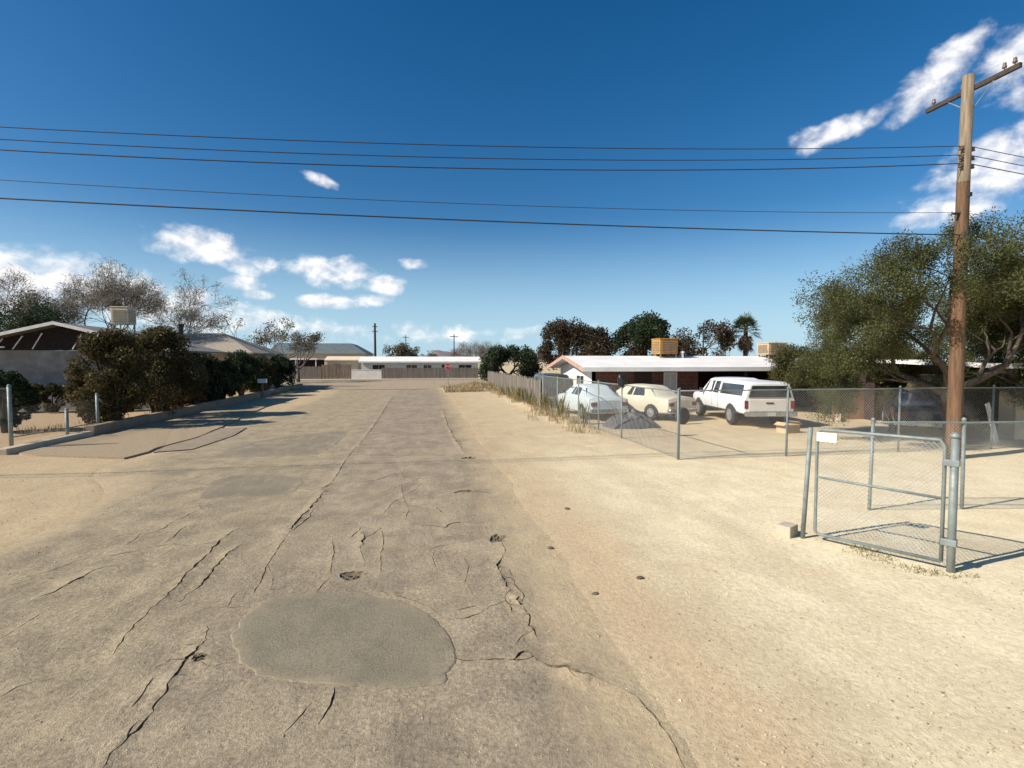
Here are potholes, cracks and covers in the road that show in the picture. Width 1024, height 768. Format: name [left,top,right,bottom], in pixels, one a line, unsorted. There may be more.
pothole [339,571,364,581]
crack [286,688,335,731]
crack [317,416,684,766]
crack [2,503,253,768]
pothole [490,534,506,543]
